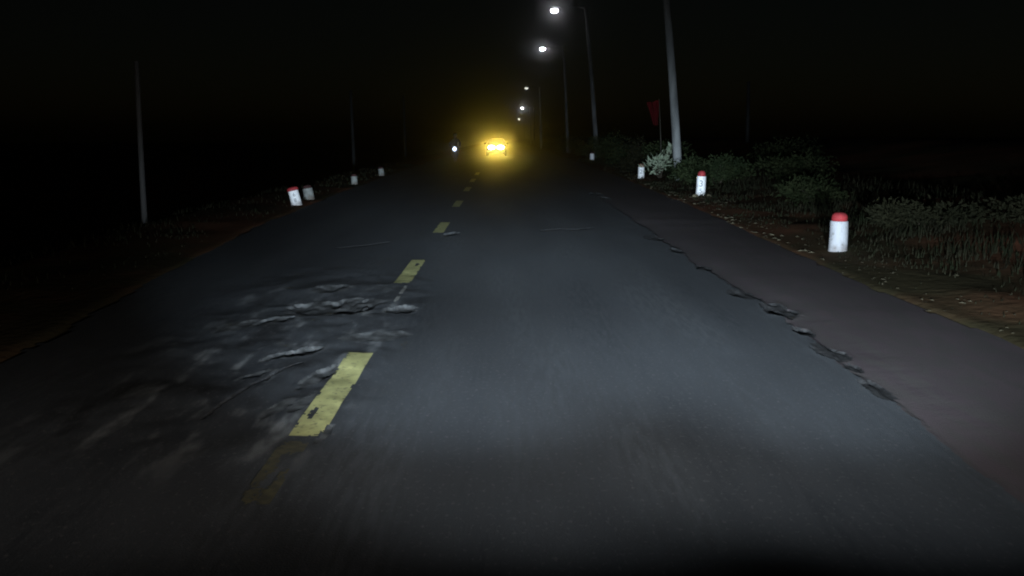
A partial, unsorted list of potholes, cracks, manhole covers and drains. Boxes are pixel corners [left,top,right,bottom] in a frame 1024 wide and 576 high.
pothole [311,284,354,294]
pothole [287,393,316,413]
pothole [313,424,336,444]
pothole [256,351,293,363]
pothole [384,305,419,314]
pothole [258,398,299,421]
pothole [256,316,295,326]
pothole [208,320,260,333]
pothole [283,297,392,317]
pothole [338,330,413,342]
pothole [292,363,339,393]
pothole [283,346,325,357]
